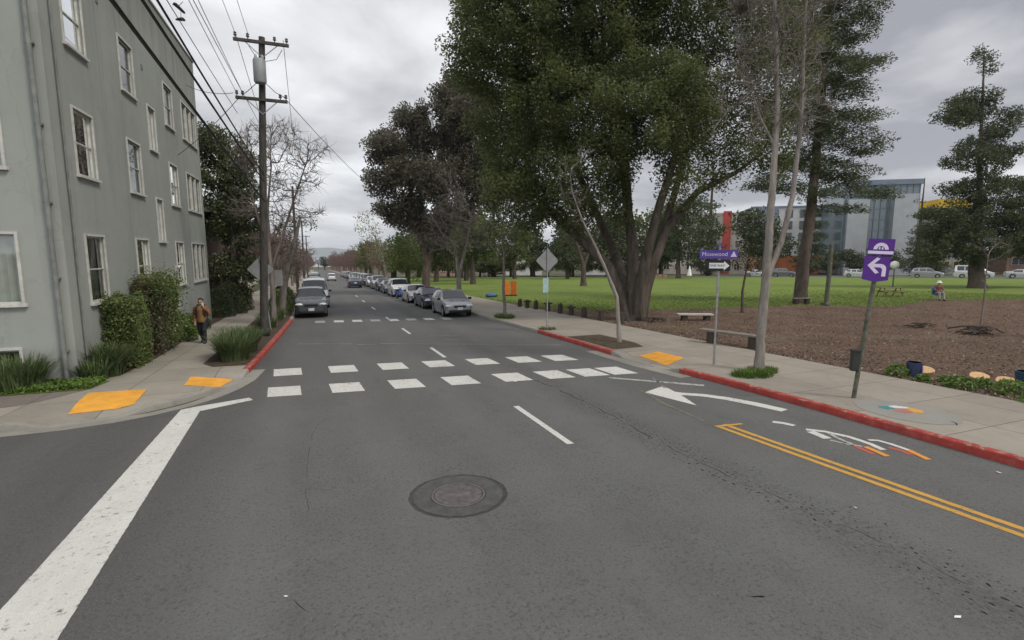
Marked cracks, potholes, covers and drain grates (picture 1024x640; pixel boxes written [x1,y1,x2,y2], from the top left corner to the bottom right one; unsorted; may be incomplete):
manhole cover [408,474,508,518]
